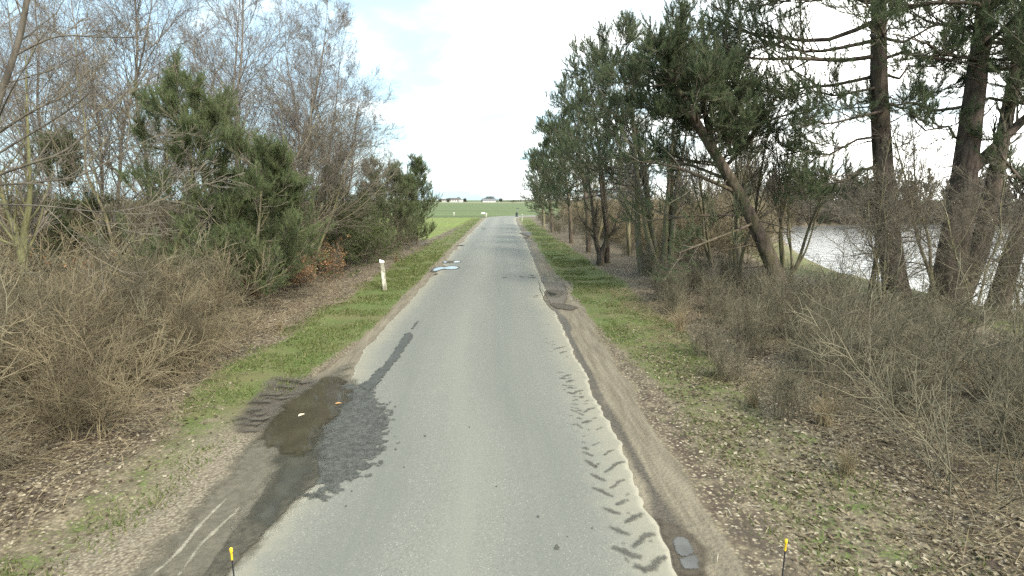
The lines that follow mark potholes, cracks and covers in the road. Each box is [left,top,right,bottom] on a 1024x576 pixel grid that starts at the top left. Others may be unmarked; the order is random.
pothole [542,281,567,304]
